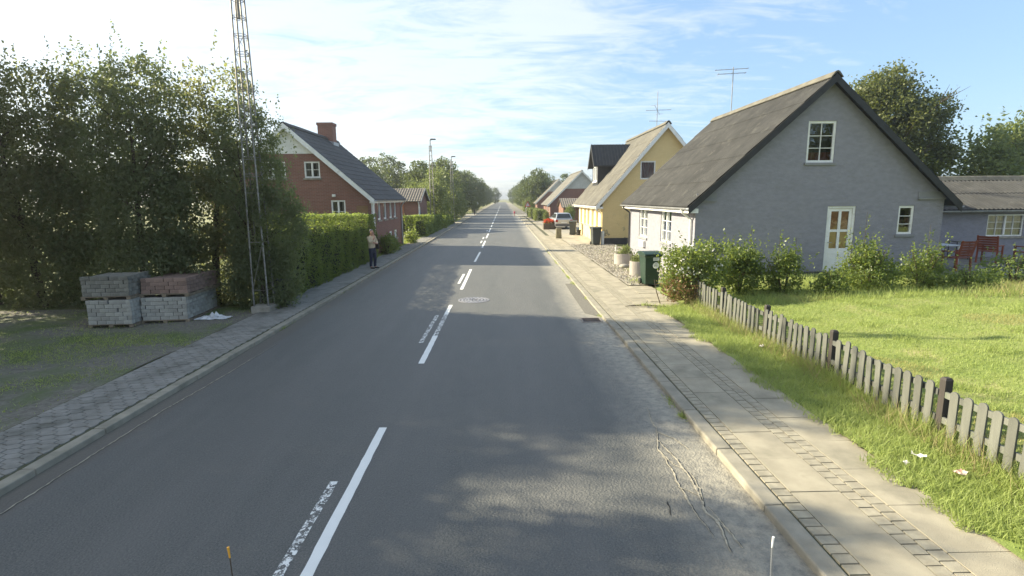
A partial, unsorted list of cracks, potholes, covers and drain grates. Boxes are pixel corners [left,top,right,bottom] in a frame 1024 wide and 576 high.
crack [646,407,744,552]
